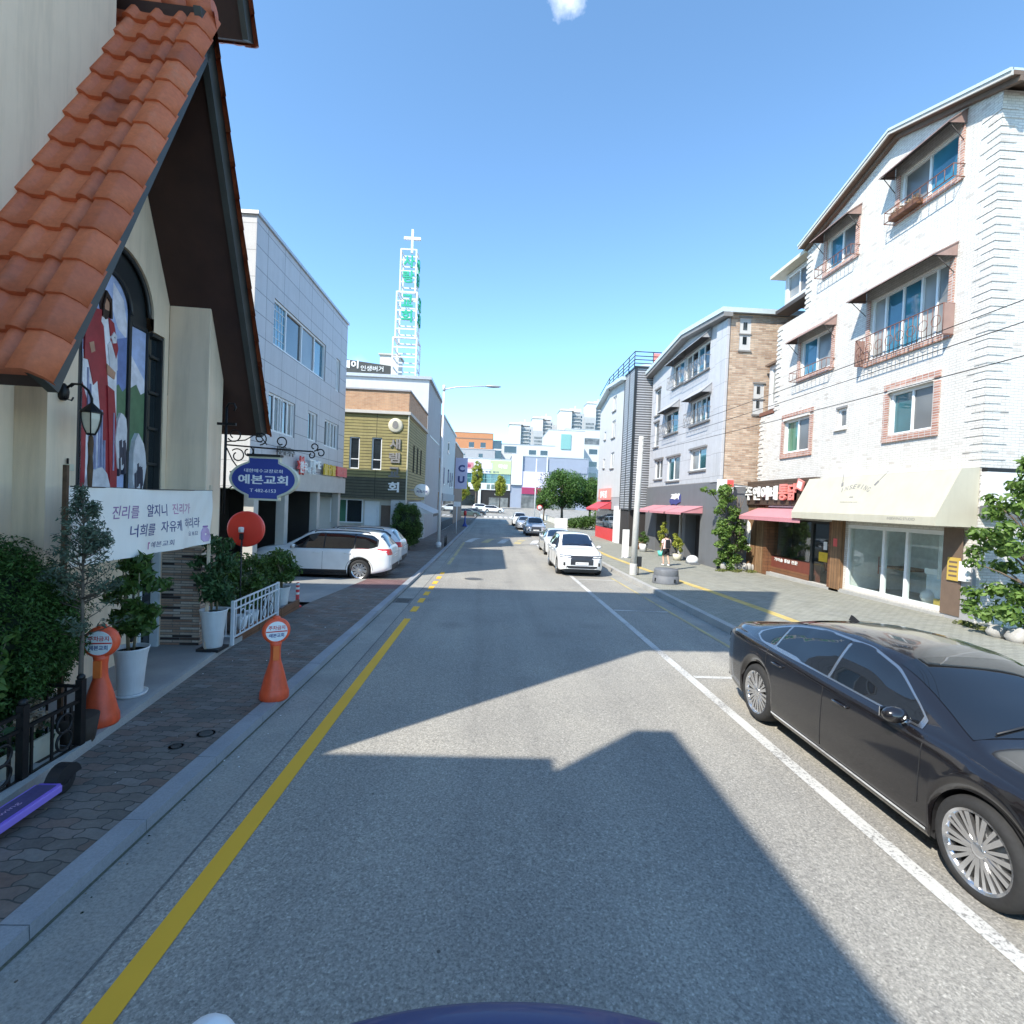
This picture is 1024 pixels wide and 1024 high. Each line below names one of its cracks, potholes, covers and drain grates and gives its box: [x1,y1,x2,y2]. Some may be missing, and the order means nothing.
manhole cover [196,730,216,738]
